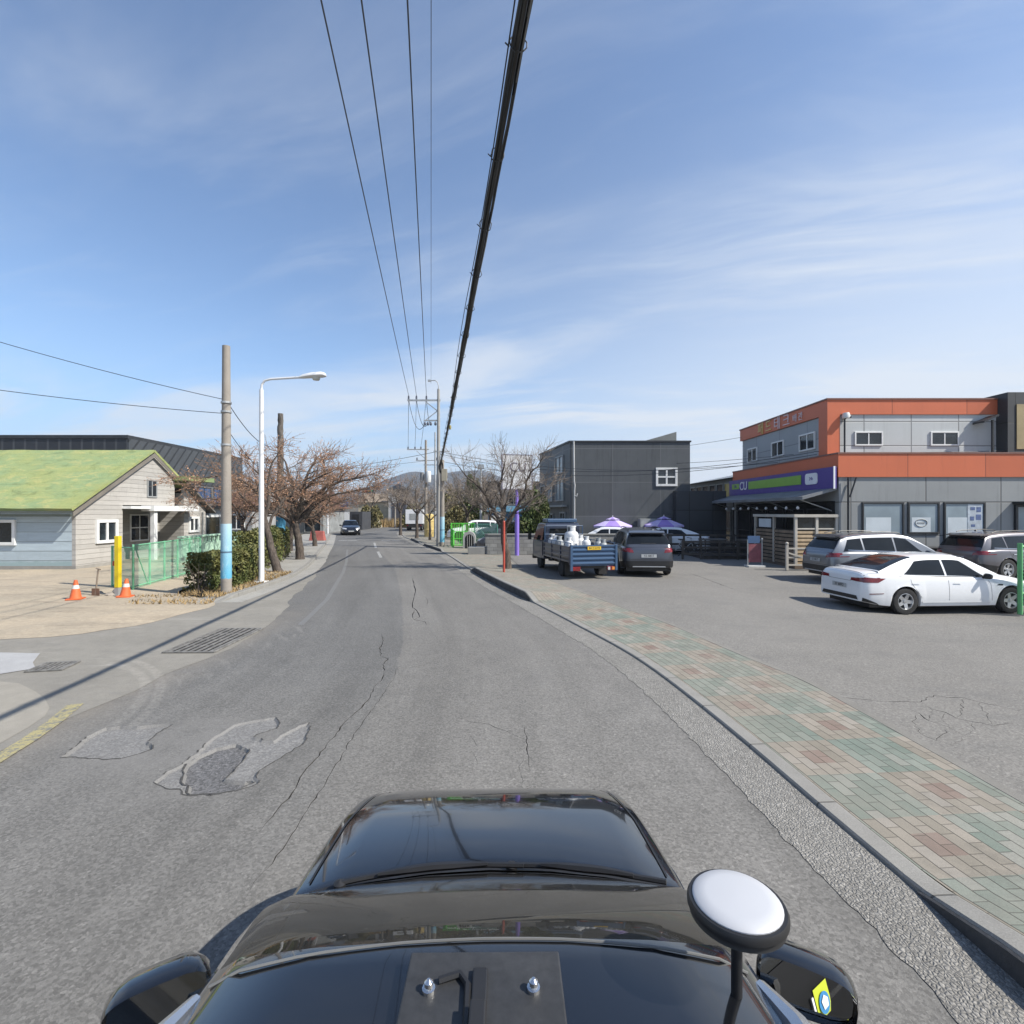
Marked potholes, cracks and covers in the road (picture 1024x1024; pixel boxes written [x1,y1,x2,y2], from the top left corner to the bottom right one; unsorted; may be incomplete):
crack [259,638,396,868]
crack [844,695,1012,746]
drain grate [24,660,81,673]
drain grate [161,628,264,653]
